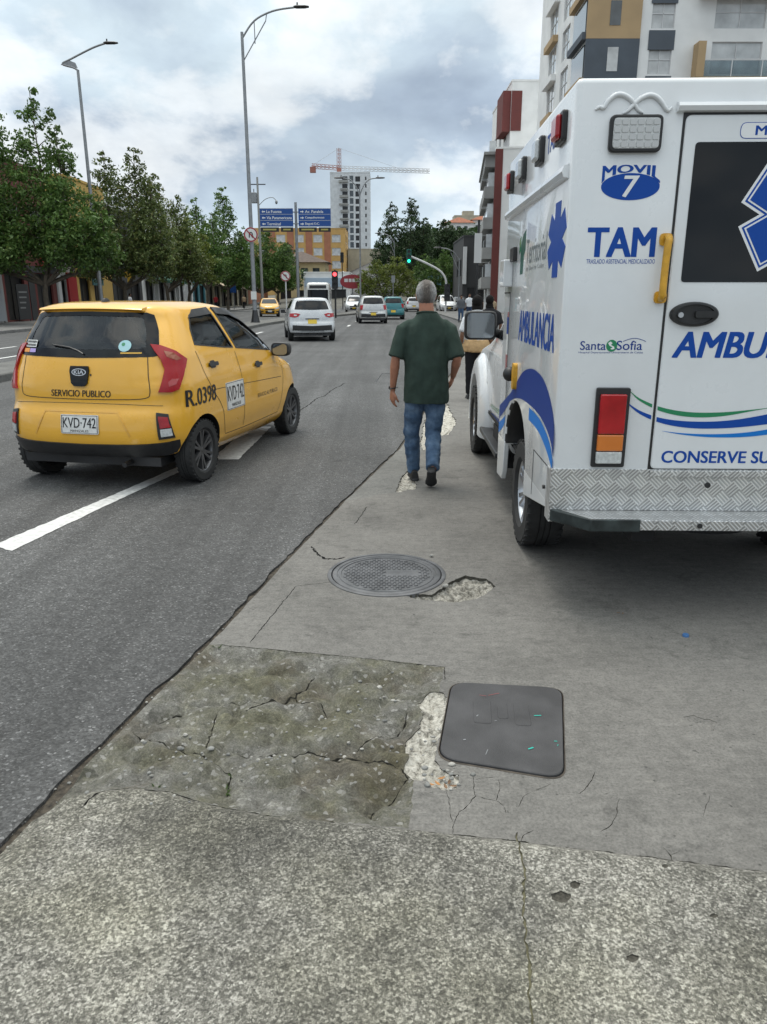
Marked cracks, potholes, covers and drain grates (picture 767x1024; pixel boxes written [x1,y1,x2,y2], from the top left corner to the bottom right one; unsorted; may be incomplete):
crack [446,777,548,834]
pothole [395,471,417,492]
pothole [420,404,456,450]
pothole [404,692,459,790]
manhole cover [438,683,566,779]
pothole [410,575,496,602]
pothole [551,891,571,903]
manhole cover [327,553,446,598]
crack [137,678,409,819]
